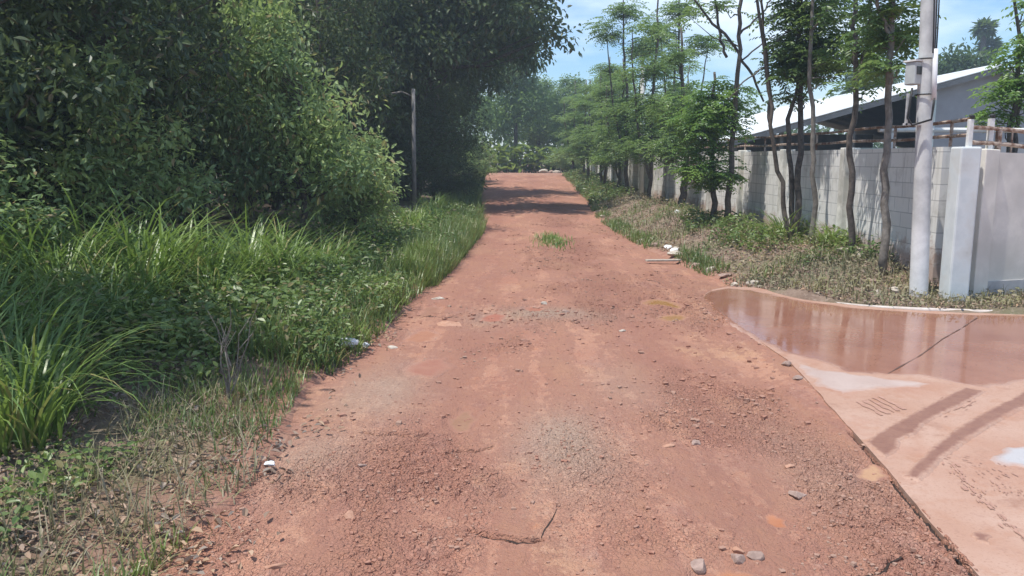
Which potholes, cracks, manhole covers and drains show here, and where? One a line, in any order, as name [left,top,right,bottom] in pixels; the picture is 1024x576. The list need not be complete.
crack [470,509,557,545]
